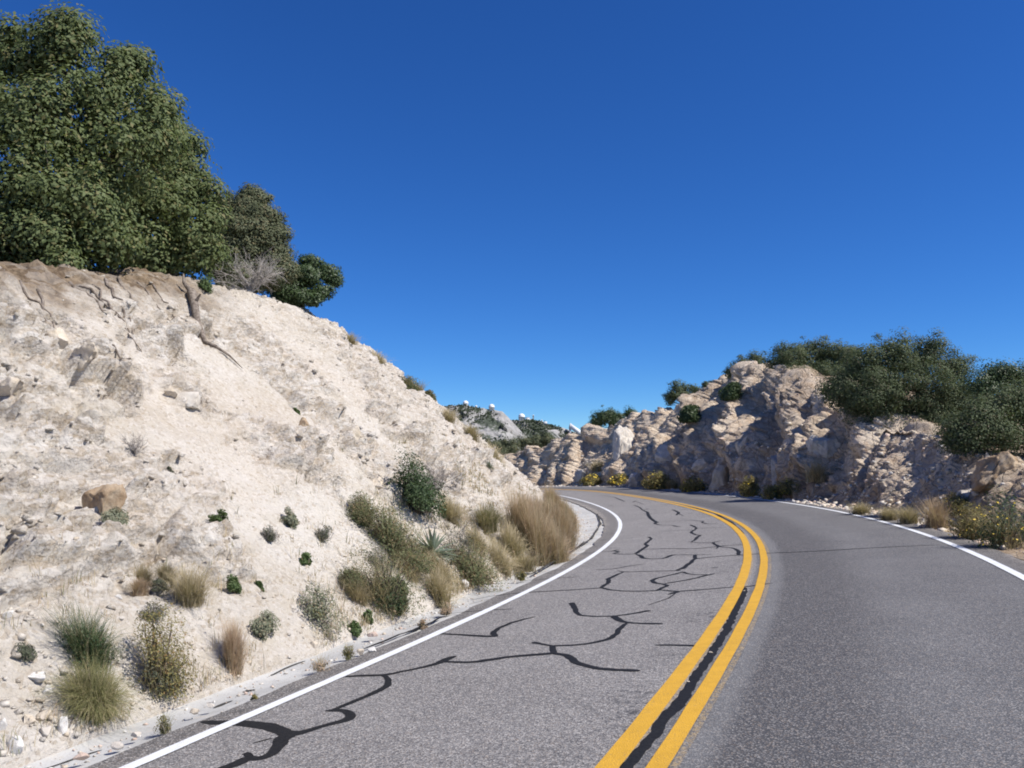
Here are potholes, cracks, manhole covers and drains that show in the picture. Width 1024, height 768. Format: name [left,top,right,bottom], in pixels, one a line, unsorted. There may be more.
crack [364,609,502,649]
